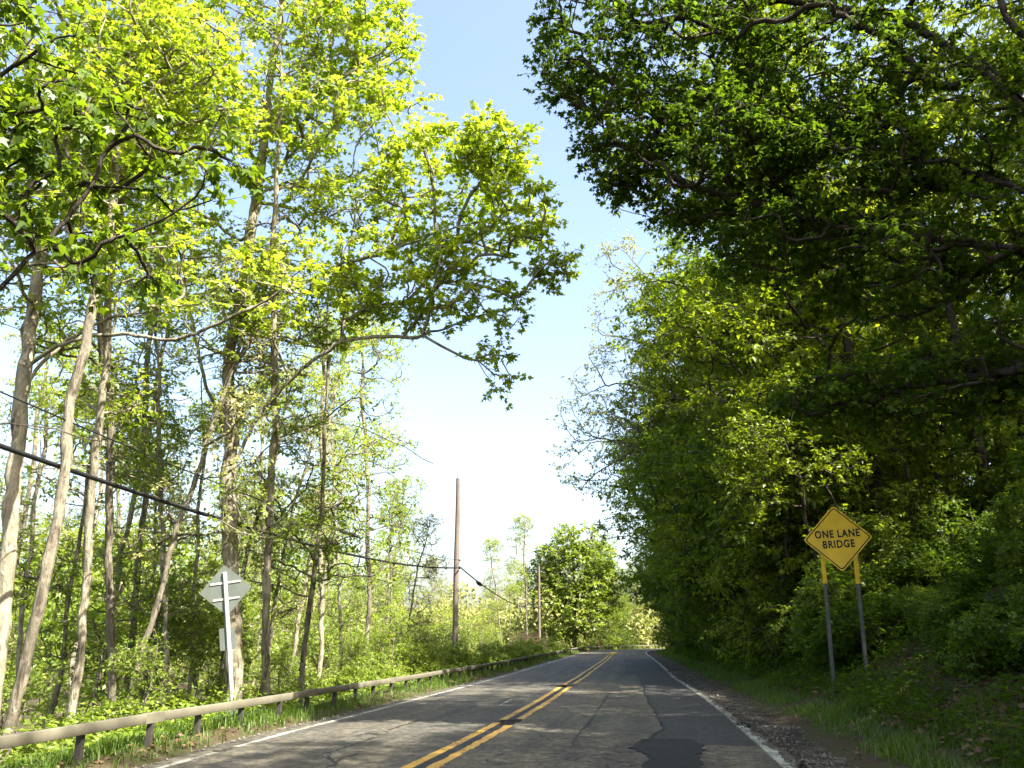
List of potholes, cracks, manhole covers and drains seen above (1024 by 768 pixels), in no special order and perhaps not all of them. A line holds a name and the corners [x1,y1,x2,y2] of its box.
crack [318,719,419,768]
crack [478,694,658,768]
